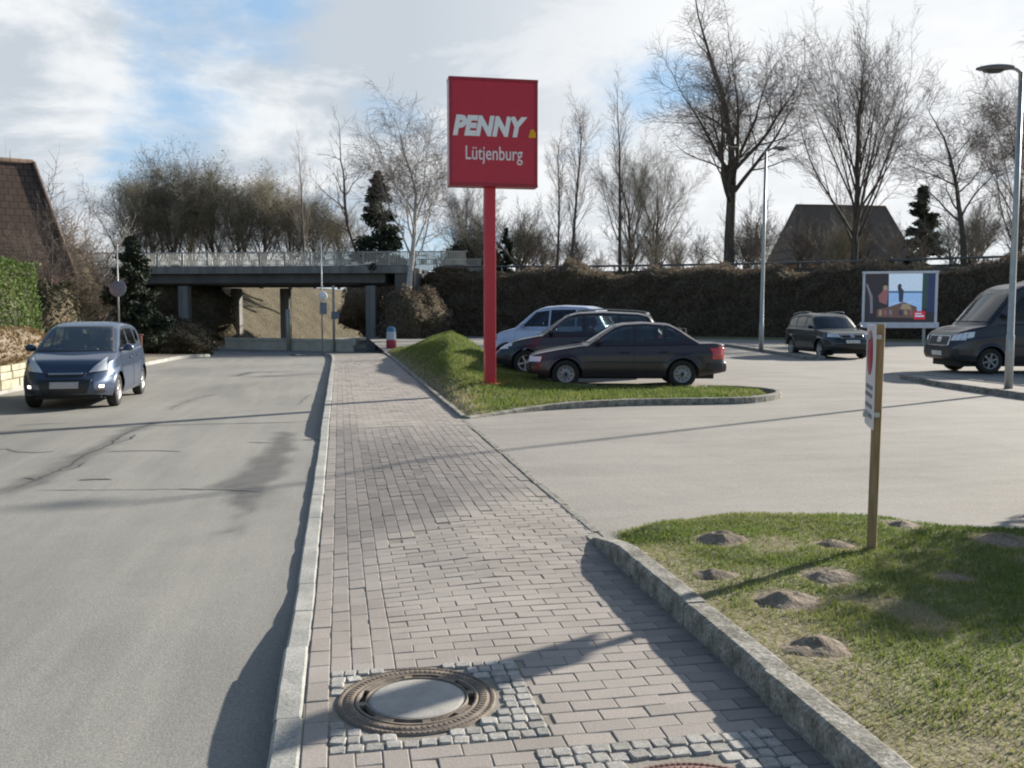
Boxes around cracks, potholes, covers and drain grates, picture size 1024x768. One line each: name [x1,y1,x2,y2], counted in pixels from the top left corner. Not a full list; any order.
manhole cover [336,668,496,736]
crack [0,394,308,492]
